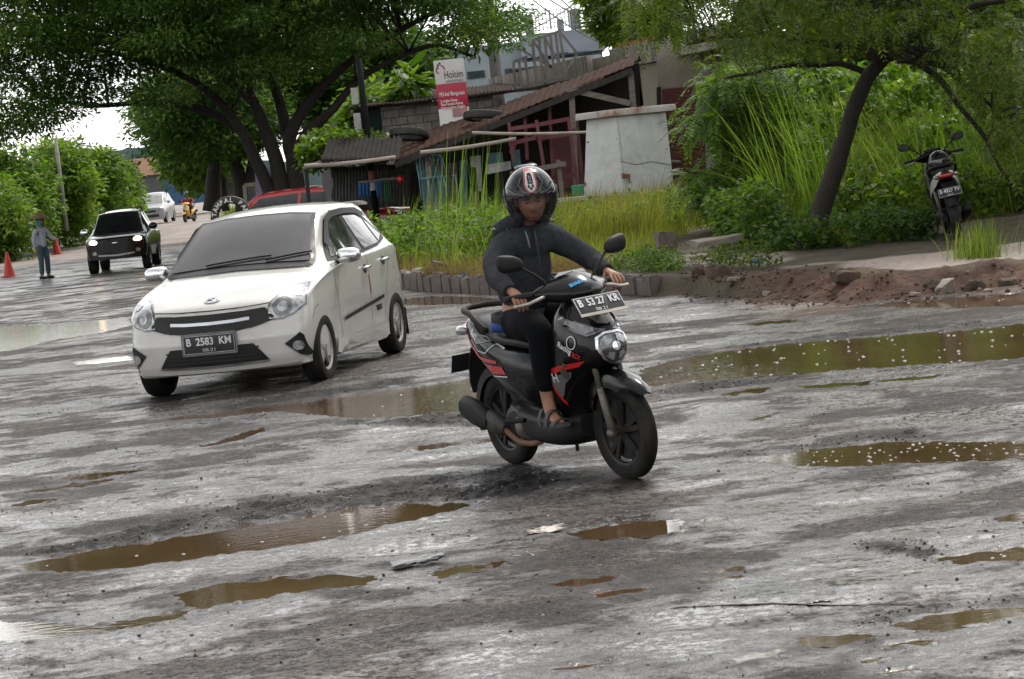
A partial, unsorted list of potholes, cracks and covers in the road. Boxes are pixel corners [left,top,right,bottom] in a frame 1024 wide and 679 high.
crack [671,599,925,609]
pothole [171,571,382,613]
pothole [144,378,477,422]
pothole [16,477,120,495]
pothole [547,518,693,541]
pothole [783,631,882,650]
pothole [883,606,1024,634]
pothole [636,321,1024,387]
pothole [795,379,877,389]
pothole [182,425,272,449]
pothole [421,560,513,580]
pothole [53,466,152,481]
